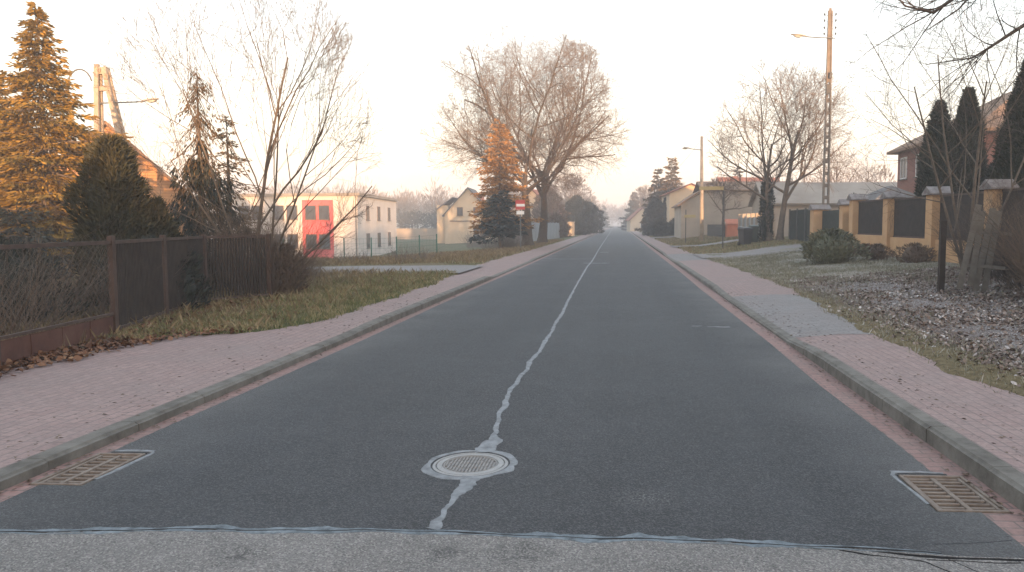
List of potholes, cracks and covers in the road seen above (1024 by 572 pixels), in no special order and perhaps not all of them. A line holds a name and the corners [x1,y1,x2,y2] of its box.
drain grate [890,471,1011,514]
drain grate [29,450,156,486]
manhole cover [421,450,518,480]
